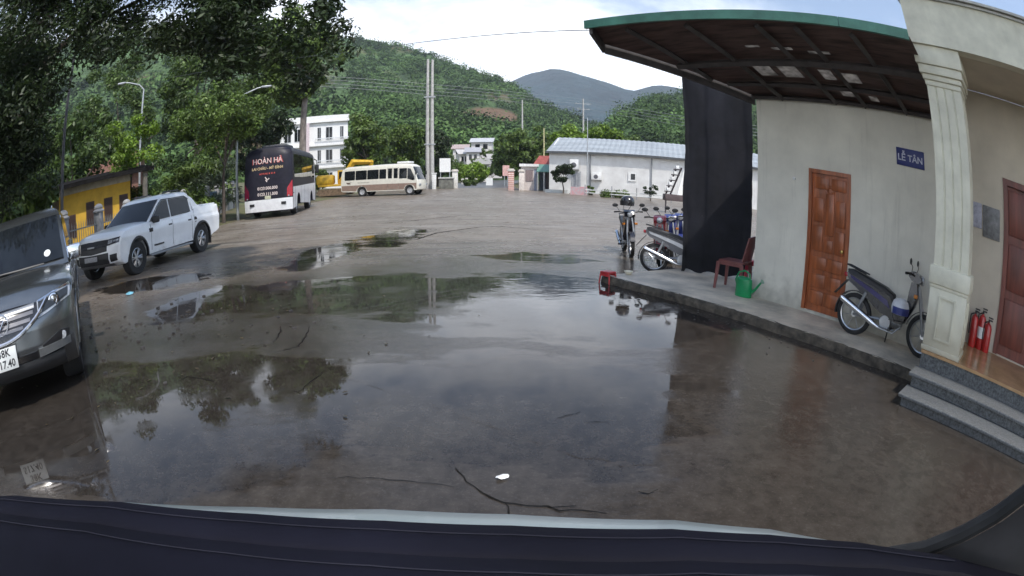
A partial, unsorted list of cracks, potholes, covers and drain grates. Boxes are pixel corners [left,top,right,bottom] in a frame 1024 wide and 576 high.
crack [327,468,607,514]
